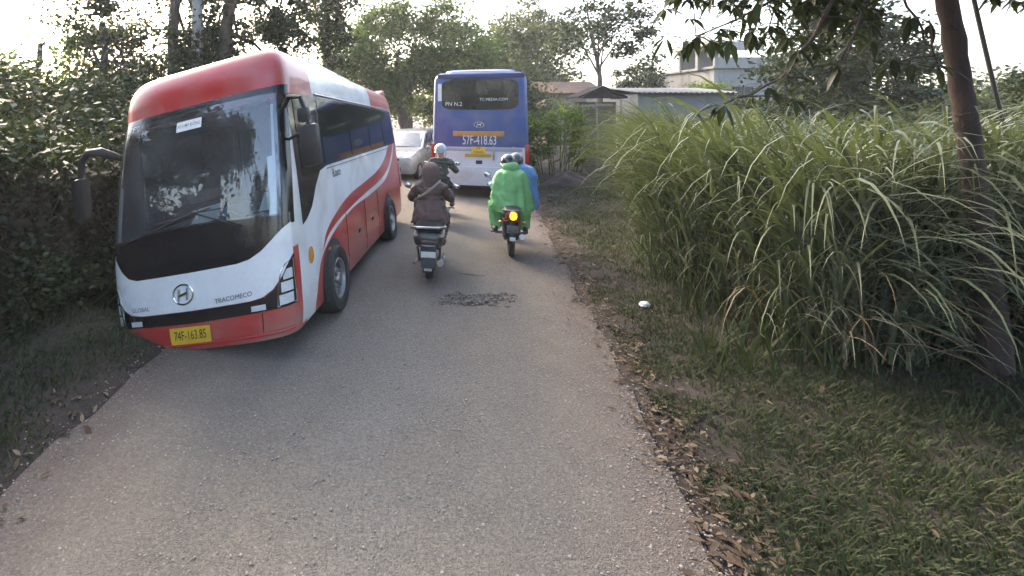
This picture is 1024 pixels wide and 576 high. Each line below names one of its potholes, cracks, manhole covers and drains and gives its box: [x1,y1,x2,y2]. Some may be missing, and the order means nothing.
pothole [423,291,527,310]
